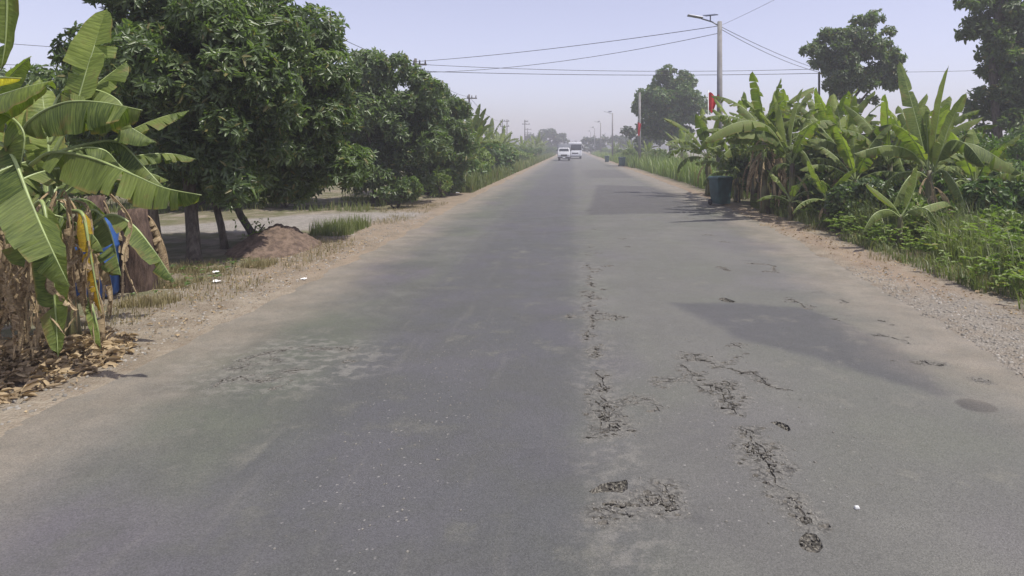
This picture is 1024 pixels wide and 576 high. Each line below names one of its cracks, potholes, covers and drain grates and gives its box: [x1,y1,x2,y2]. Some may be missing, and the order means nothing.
crack [783,297,849,321]
pothole [589,480,628,494]
crack [876,320,944,366]
pothole [798,533,823,553]
crack [553,214,831,528]
